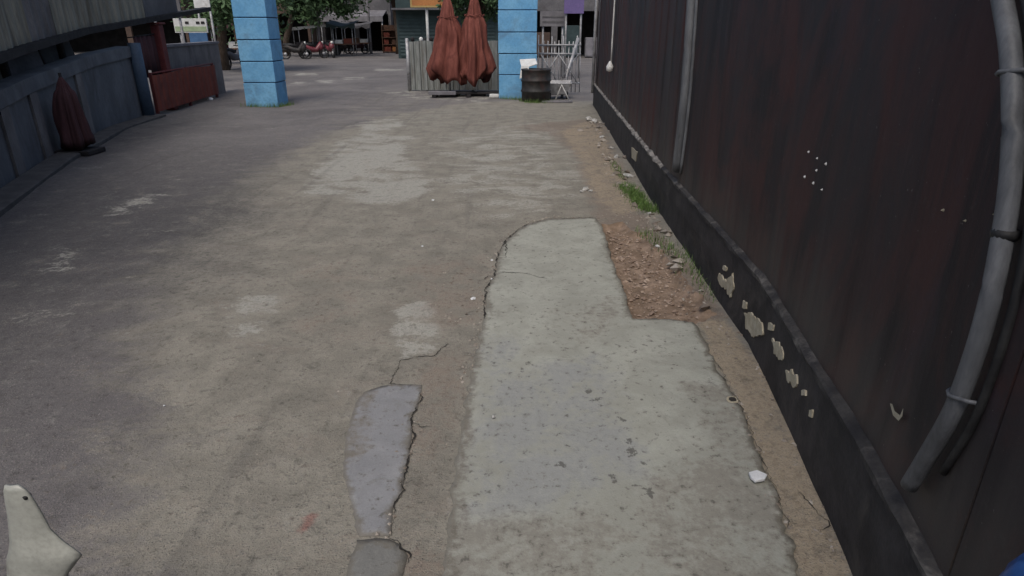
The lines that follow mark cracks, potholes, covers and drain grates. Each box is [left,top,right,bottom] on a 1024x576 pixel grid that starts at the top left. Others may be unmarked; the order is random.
crack [389,392,425,573]
crack [483,217,600,318]
